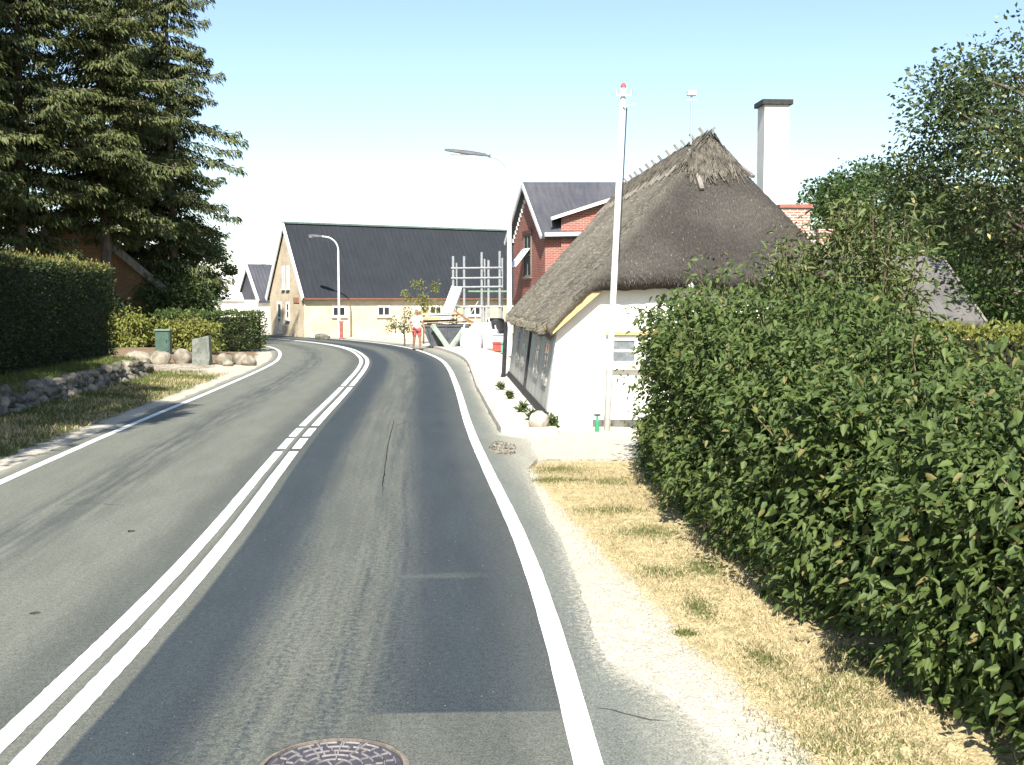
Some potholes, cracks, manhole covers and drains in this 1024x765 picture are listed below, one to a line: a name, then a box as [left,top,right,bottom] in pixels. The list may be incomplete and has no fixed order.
crack [382,421,397,493]
manhole cover [259,738,409,765]
crack [599,708,667,721]
